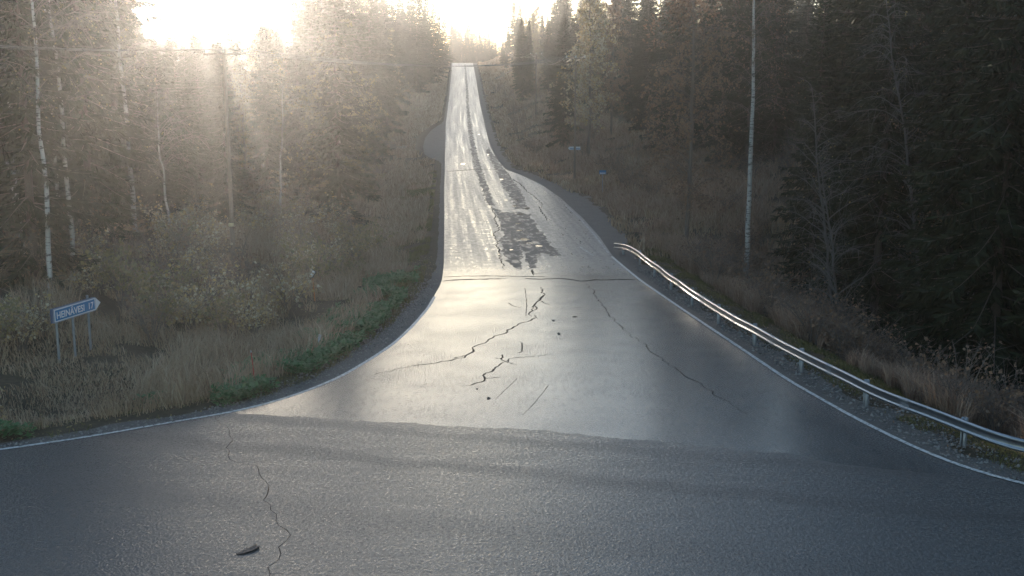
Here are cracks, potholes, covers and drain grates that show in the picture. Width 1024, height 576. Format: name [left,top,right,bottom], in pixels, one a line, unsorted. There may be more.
crack [377,205,746,414]
crack [215,417,291,576]
